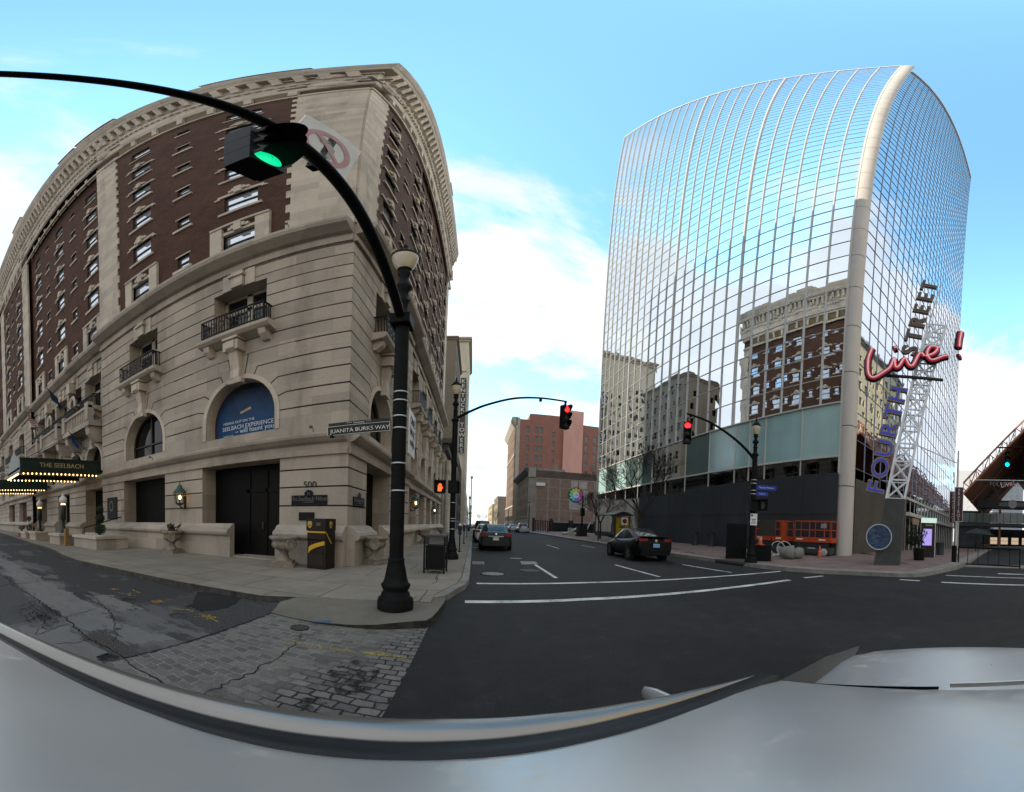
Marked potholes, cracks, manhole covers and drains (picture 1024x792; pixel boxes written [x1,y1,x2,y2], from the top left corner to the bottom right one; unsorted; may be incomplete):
crack [3,571,165,684]
crack [204,632,302,694]
